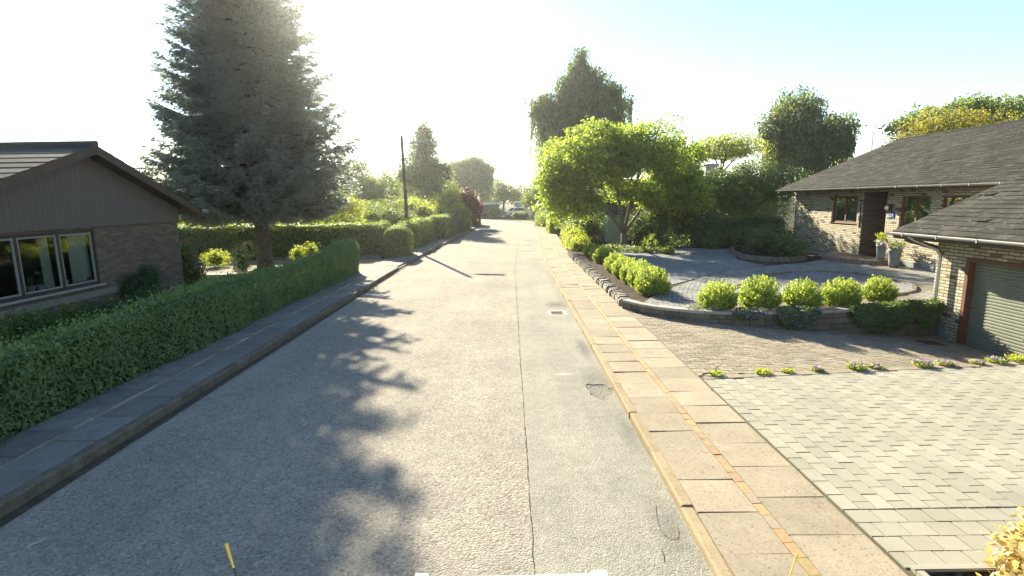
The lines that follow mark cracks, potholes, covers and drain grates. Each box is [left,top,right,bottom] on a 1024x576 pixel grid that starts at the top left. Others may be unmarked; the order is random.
pothole [586,384,614,401]
